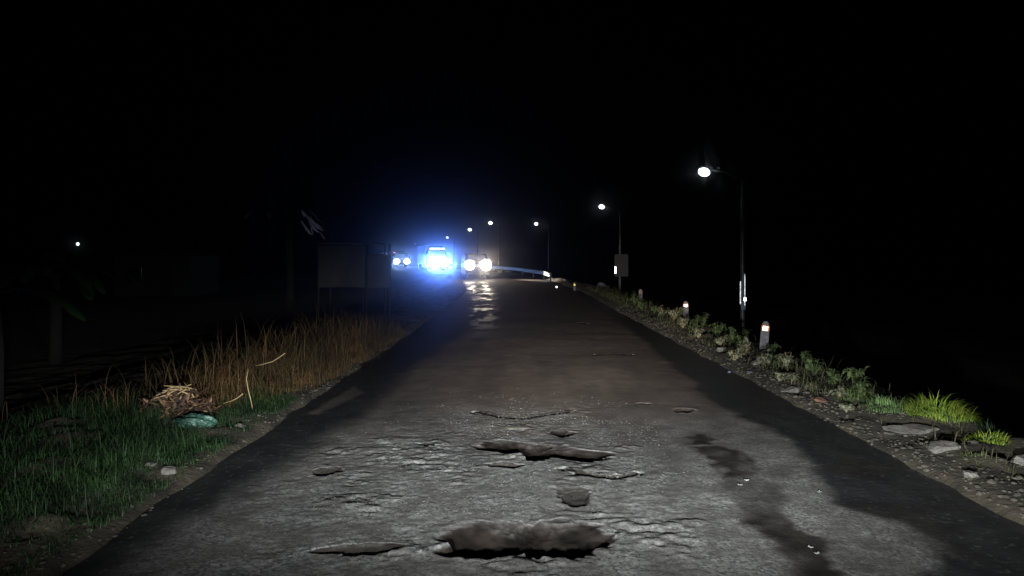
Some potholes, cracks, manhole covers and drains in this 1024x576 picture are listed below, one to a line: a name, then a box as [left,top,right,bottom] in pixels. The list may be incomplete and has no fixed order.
pothole [546,479,601,511]
pothole [464,438,628,464]
crack [565,467,640,482]
pothole [475,459,534,472]
pothole [297,537,420,562]
pothole [419,515,630,565]
pothole [303,463,352,479]
pothole [540,427,585,439]
